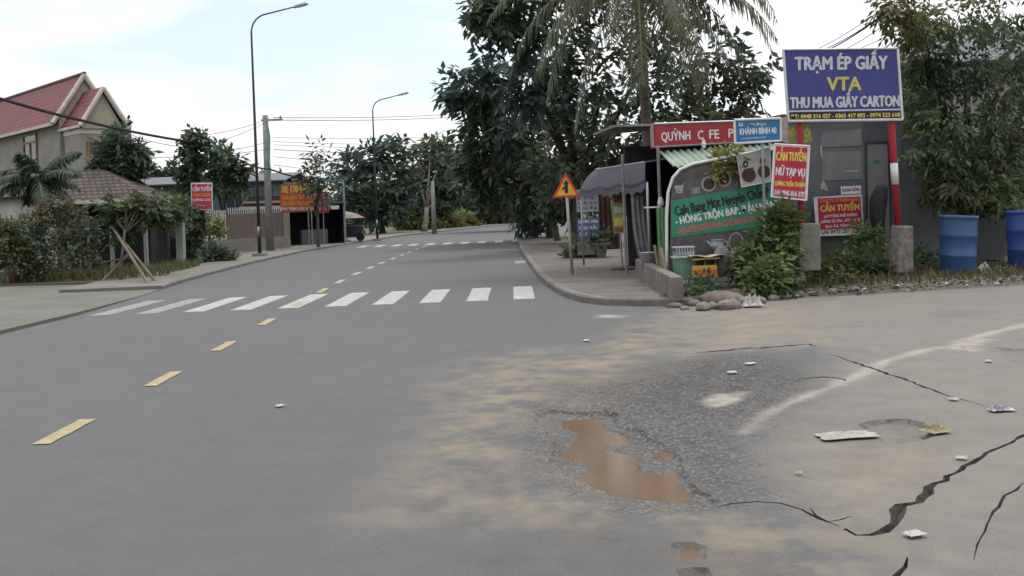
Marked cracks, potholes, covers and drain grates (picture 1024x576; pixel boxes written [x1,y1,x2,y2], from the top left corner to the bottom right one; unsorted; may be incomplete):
crack [692,344,814,354]
pothole [533,409,724,511]
crack [795,354,988,407]
pothole [669,542,708,565]
pothole [858,419,936,444]
crack [716,434,1024,560]
pothole [676,567,712,576]
